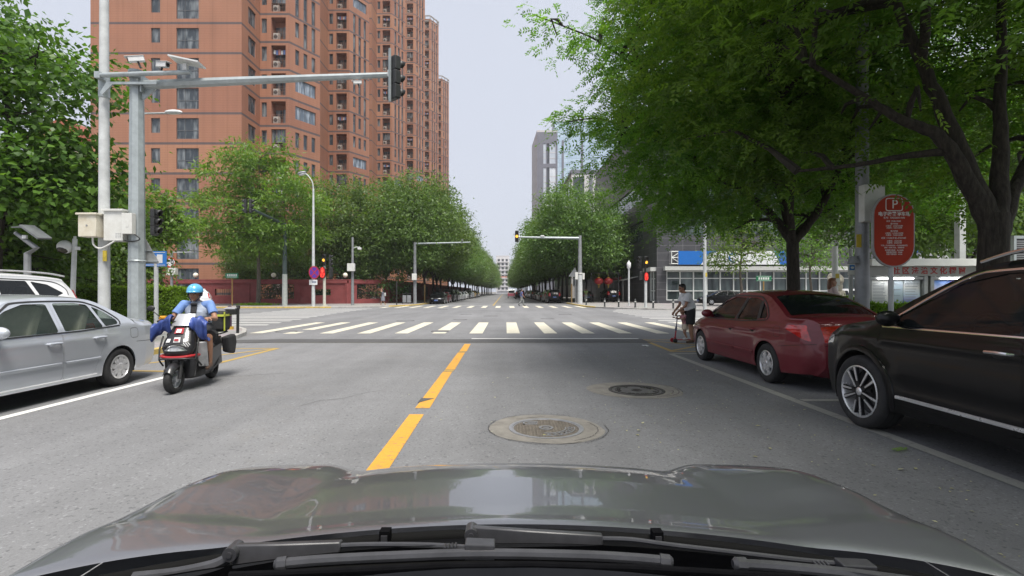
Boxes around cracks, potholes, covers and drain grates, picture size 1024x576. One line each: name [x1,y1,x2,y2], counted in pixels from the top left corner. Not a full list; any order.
manhole cover [489,415,605,444]
manhole cover [586,382,683,399]
